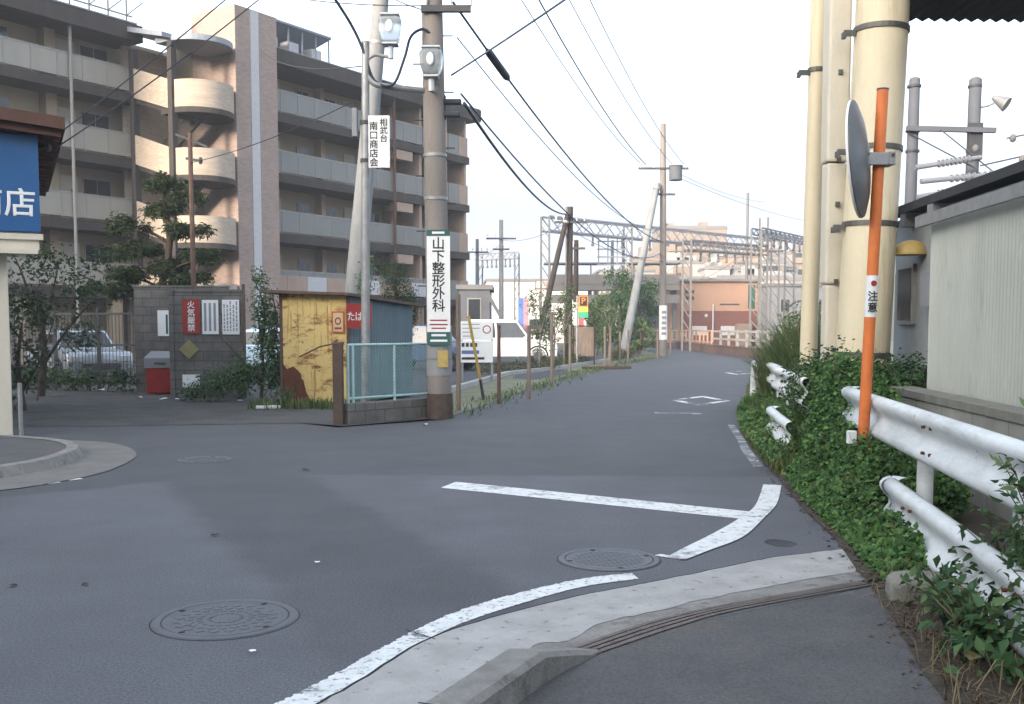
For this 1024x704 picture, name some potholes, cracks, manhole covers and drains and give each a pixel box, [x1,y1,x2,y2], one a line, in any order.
manhole cover [557,548,661,572]
manhole cover [149,599,300,641]
